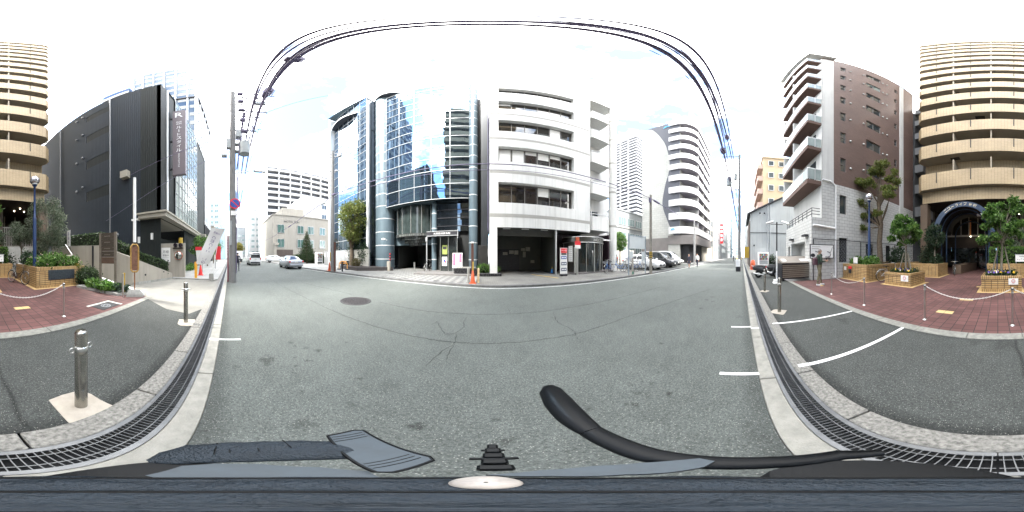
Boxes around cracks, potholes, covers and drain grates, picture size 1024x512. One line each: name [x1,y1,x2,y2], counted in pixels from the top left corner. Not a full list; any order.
crack [267,277,707,363]
drain grate [187,327,212,356]
manhole cover [340,297,371,305]
drain grate [149,354,204,409]
drain grate [755,311,771,328]
manhole cover [87,300,122,310]
drain grate [793,402,997,473]
drain grate [768,354,822,409]
drain grate [201,311,217,328]
drain grate [759,327,785,356]
